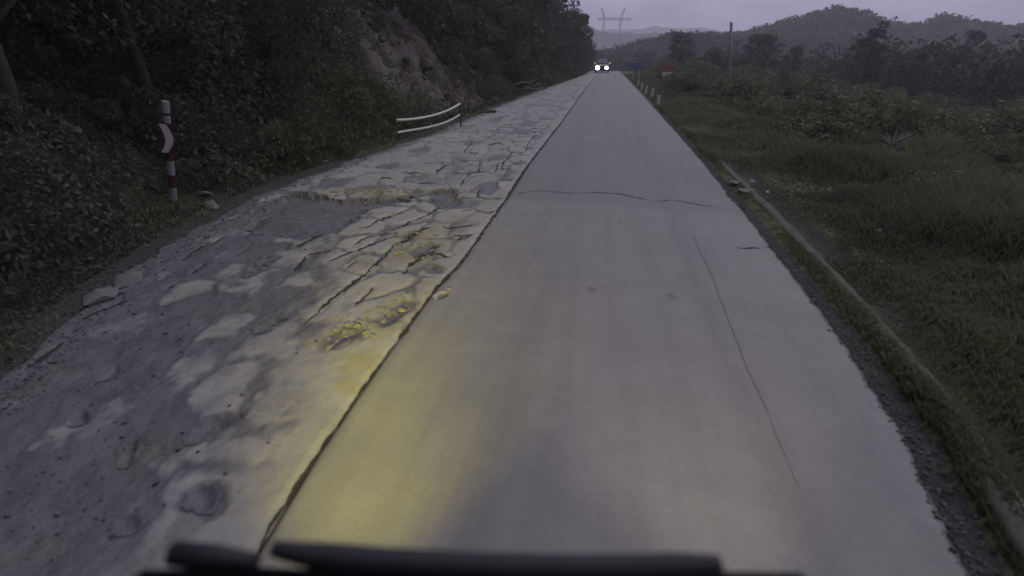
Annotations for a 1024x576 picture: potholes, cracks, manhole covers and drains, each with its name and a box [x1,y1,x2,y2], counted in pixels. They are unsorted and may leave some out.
crack [294,119,554,324]
crack [694,237,801,489]
pothole [243,192,416,239]
crack [26,299,126,369]
crack [182,234,228,273]
crack [518,190,713,207]
pothole [324,328,362,348]
pothole [181,482,223,515]
pothole [373,301,415,327]
